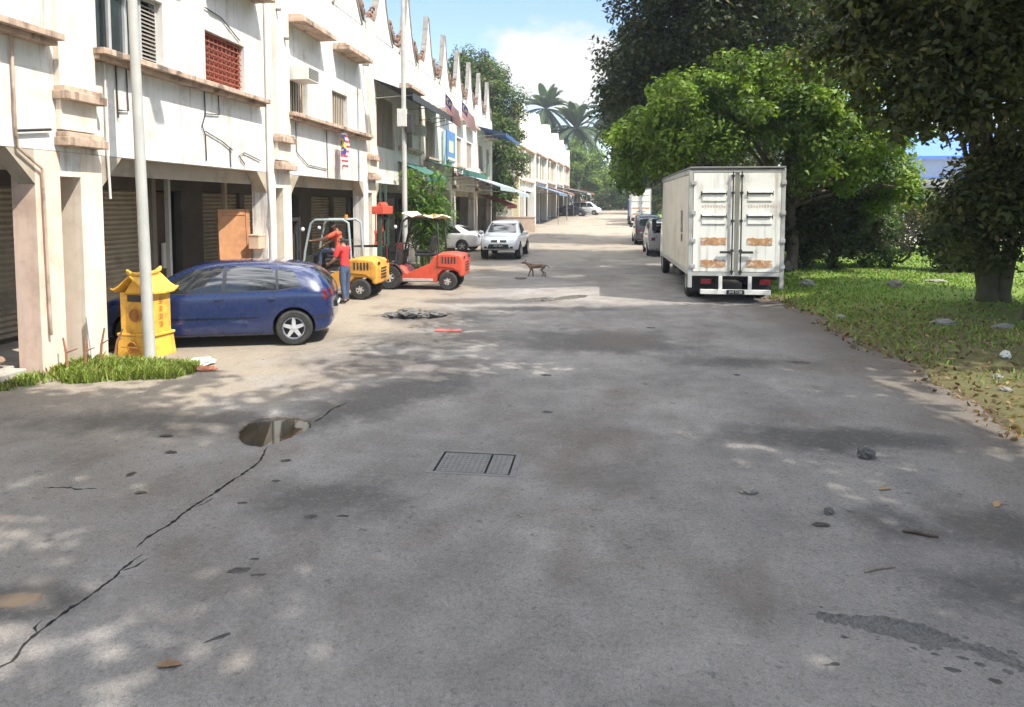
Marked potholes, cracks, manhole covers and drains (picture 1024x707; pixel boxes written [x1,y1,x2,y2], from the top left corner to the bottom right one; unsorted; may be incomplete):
pothole [238,417,311,447]
pothole [381,310,453,320]
crack [0,403,345,668]
